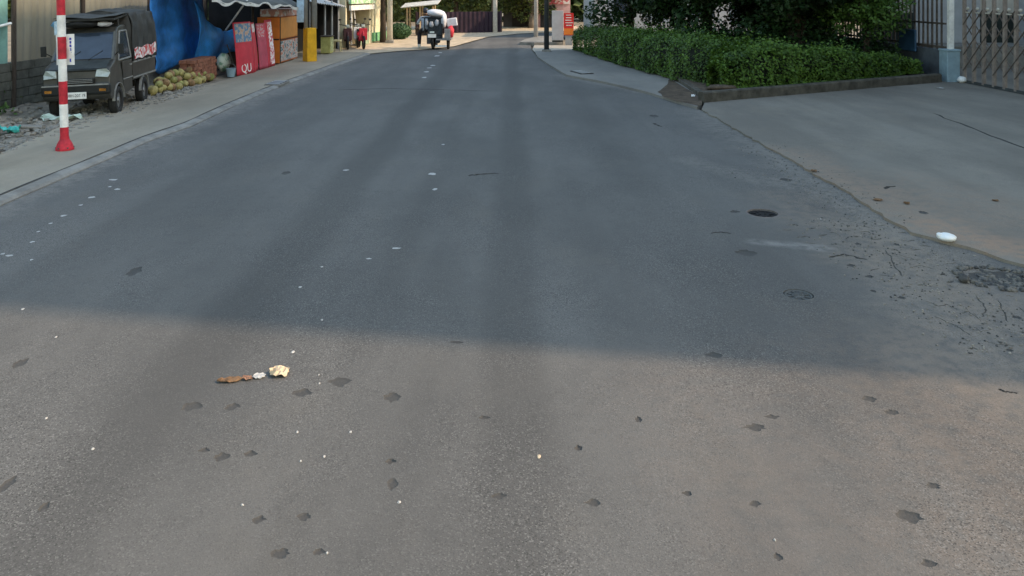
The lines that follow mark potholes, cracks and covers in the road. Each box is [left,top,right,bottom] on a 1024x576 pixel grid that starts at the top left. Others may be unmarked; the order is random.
manhole cover [746,209,780,218]
pothole [292,388,312,397]
crack [934,113,1024,148]
crack [793,224,1024,350]
manhole cover [782,289,816,301]
pothole [328,377,352,387]
pothole [896,510,925,524]
pothole [968,268,1024,288]
pothole [743,423,766,432]
pothole [270,548,290,559]
